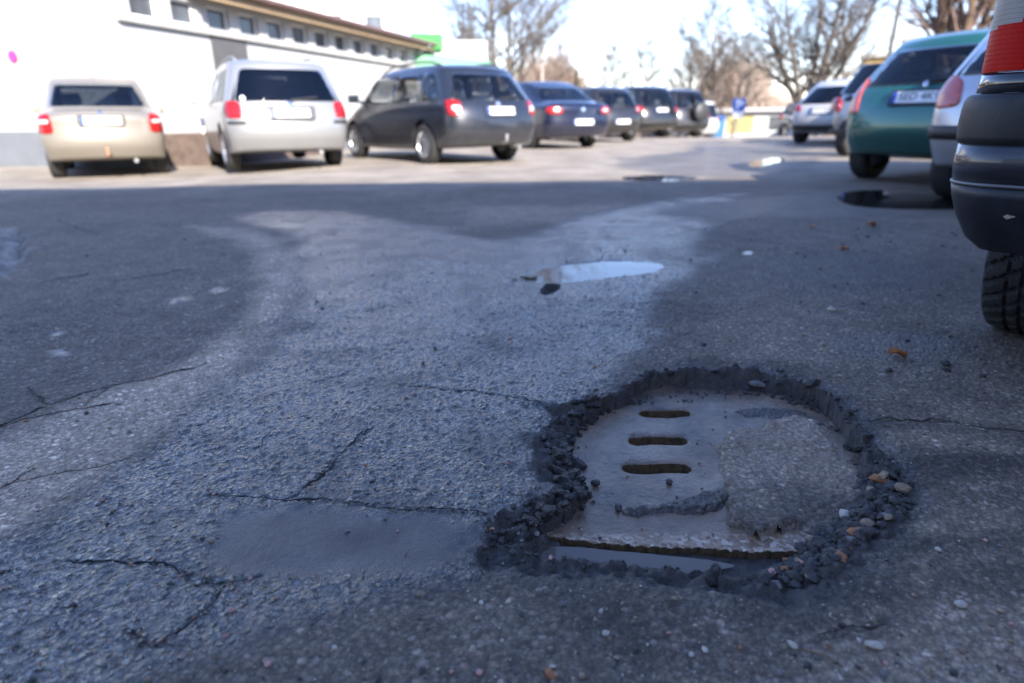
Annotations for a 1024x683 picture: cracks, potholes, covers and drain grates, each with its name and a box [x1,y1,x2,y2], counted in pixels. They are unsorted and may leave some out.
crack [0,363,207,427]
crack [2,458,128,487]
crack [398,384,547,407]
crack [868,417,1022,432]
pothole [473,363,911,611]
crack [291,427,373,498]
